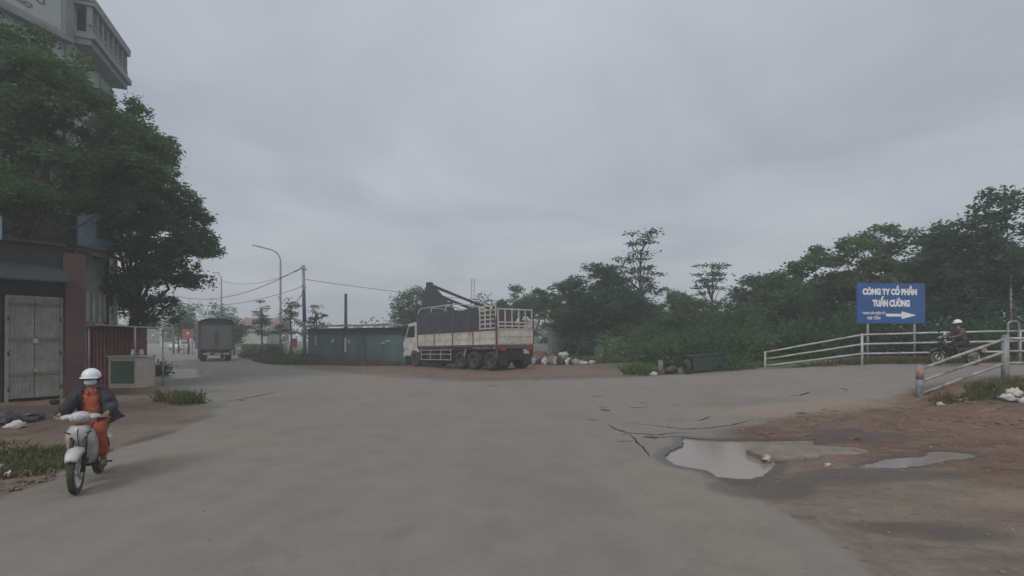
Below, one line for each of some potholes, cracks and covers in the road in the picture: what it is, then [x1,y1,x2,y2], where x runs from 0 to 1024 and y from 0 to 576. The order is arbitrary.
crack [589,402,750,455]
pothole [665,437,816,479]
